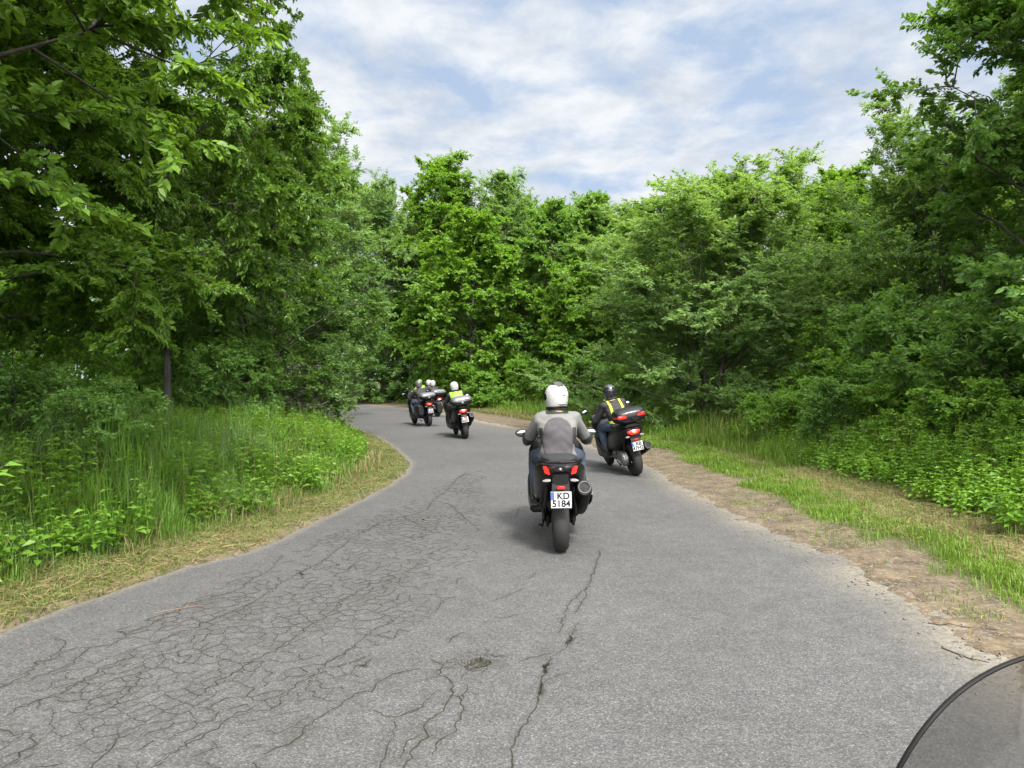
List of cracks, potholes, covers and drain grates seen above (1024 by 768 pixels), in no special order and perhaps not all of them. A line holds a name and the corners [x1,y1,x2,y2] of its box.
pothole [465,656,492,670]
crack [0,471,502,768]
crack [510,551,601,768]
